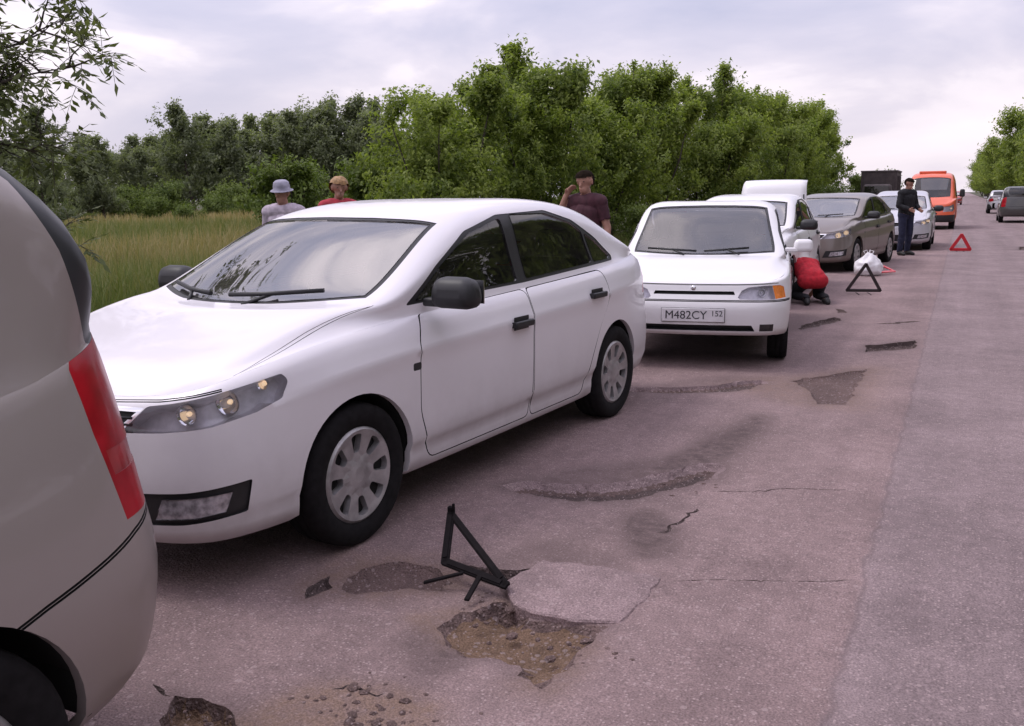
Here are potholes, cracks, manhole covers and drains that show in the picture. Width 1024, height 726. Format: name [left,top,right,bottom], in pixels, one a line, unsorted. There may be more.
pothole [500,463,726,502]
pothole [865,340,918,352]
pothole [799,317,842,330]
crack [656,509,699,533]
pothole [342,562,454,594]
pothole [437,602,608,690]
pothole [629,380,768,393]
pothole [159,695,237,726]
pothole [792,369,867,405]
pothole [305,576,332,599]
